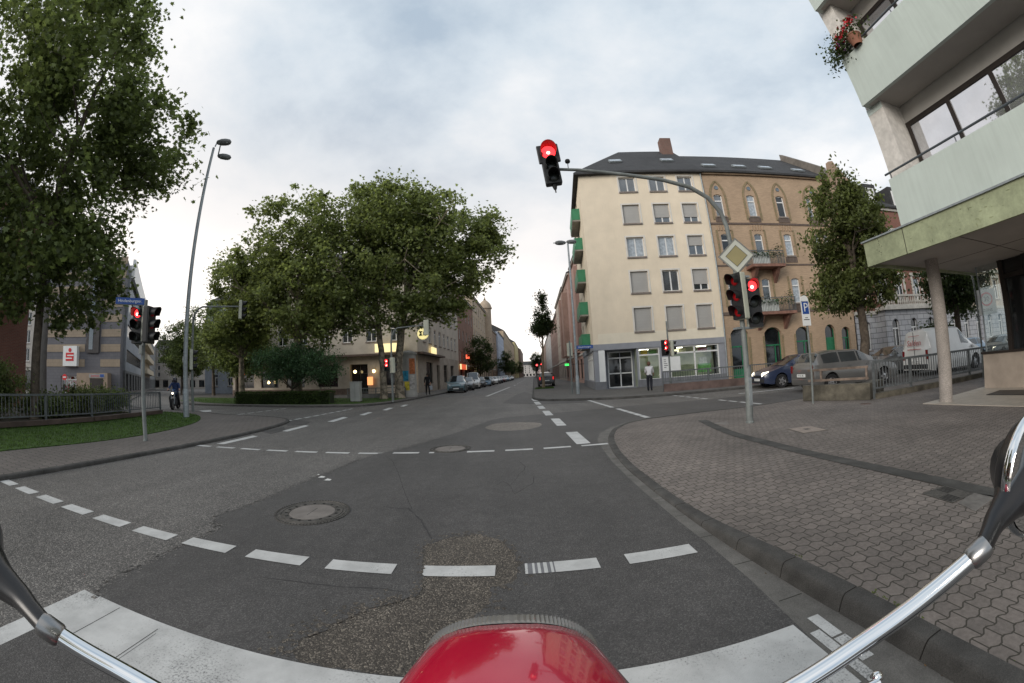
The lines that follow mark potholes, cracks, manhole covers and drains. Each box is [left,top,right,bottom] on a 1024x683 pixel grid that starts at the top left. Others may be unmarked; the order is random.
manhole cover [274,500,350,525]
drain grate [922,486,974,503]
manhole cover [430,445,471,453]
manhole cover [788,426,827,434]
